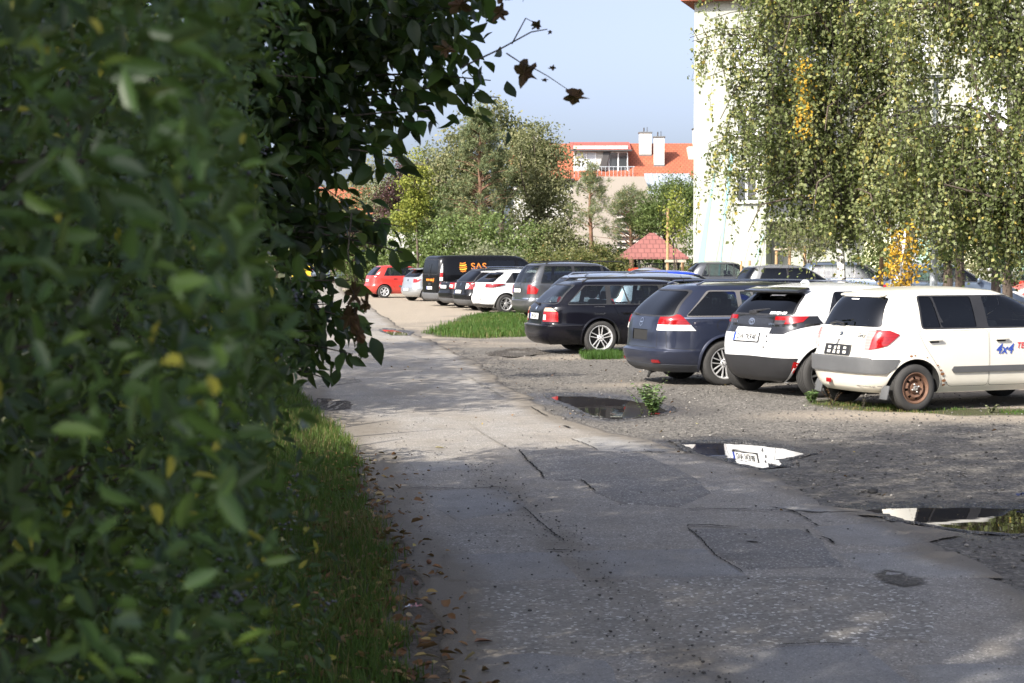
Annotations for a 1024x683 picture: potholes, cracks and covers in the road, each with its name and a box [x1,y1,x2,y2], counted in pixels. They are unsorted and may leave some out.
pothole [668,439,824,470]
crack [524,507,568,550]
pothole [543,392,677,421]
pothole [301,398,353,412]
pothole [835,501,1024,536]
pothole [379,328,414,336]
crack [687,506,841,572]
